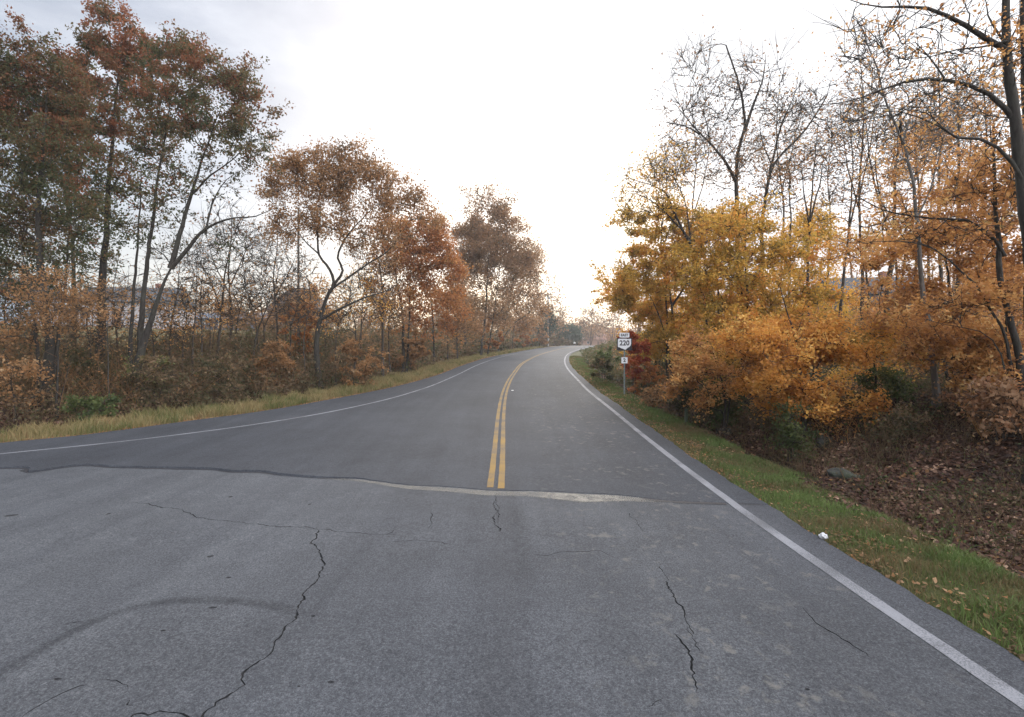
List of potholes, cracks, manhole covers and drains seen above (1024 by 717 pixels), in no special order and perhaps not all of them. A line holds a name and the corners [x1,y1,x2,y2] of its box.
crack [803,608,871,658]
crack [22,513,445,717]
crack [145,503,314,529]
crack [649,567,699,707]
